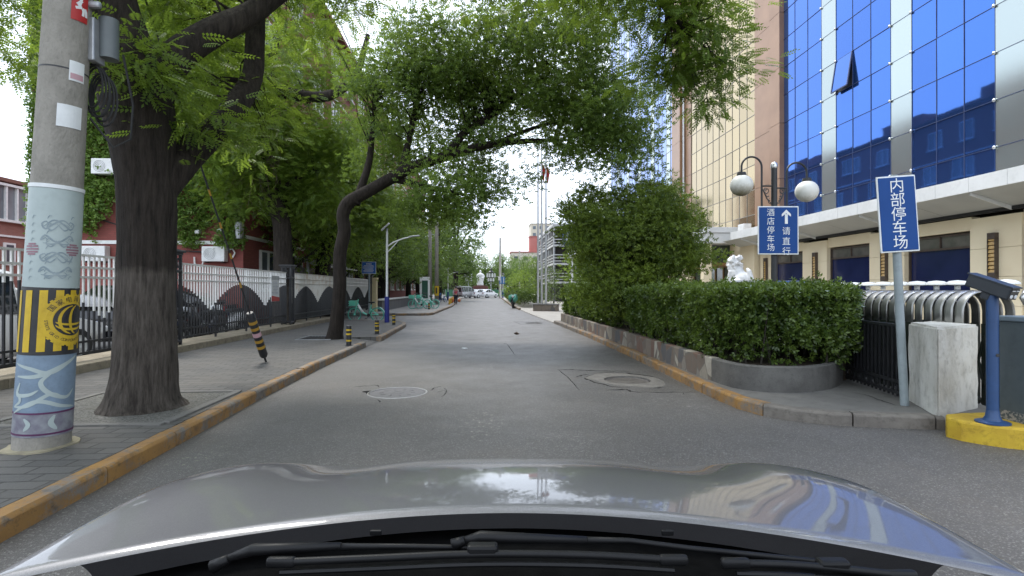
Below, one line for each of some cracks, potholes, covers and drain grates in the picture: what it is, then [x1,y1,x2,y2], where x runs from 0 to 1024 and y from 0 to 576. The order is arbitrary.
manhole cover [585,373,666,388]
manhole cover [367,387,427,399]
